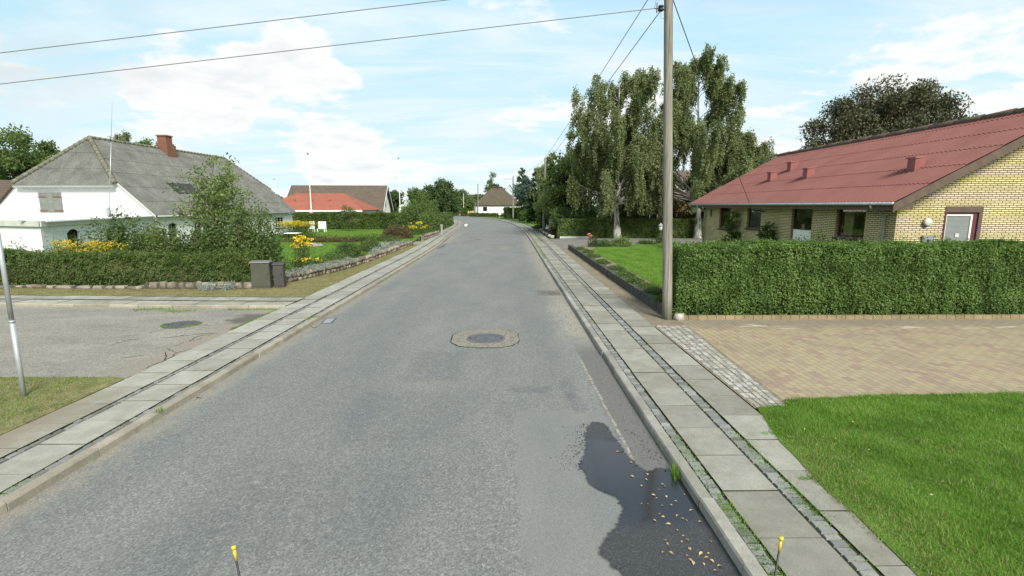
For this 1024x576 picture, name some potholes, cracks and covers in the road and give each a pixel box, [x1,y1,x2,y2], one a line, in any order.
manhole cover [450,329,520,348]
crack [112,329,207,368]
manhole cover [163,320,200,328]
